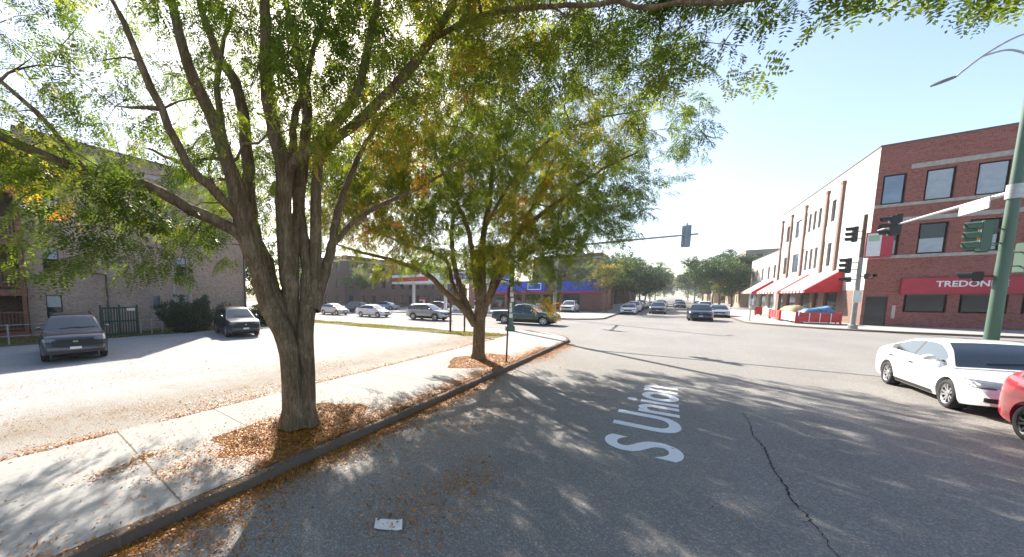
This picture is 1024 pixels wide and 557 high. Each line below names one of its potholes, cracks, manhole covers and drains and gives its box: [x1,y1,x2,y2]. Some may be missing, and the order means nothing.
crack [743,414,840,557]
